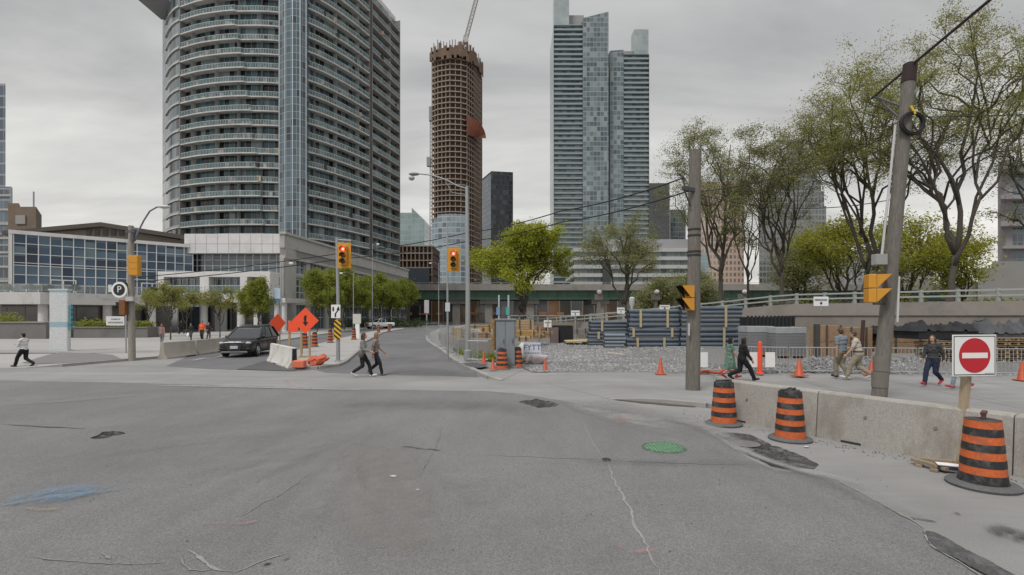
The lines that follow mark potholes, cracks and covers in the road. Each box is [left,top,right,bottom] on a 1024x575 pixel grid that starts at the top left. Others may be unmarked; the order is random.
pothole [91,431,126,439]
pothole [519,399,559,408]
crack [181,550,291,572]
crack [240,468,314,517]
crack [502,425,713,575]
manhole cover [641,442,687,454]
pothole [715,433,819,469]
